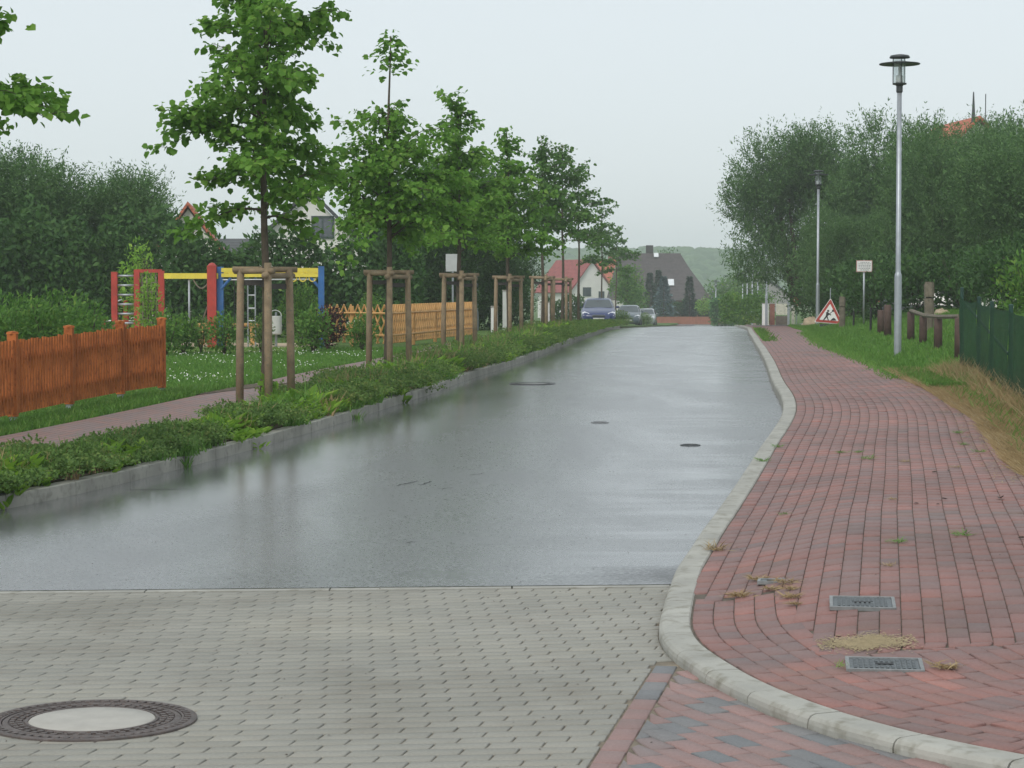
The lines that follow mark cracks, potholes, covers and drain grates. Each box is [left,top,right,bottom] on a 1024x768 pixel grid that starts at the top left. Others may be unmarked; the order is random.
manhole cover [0,699,197,743]
utility cover [757,578,784,586]
